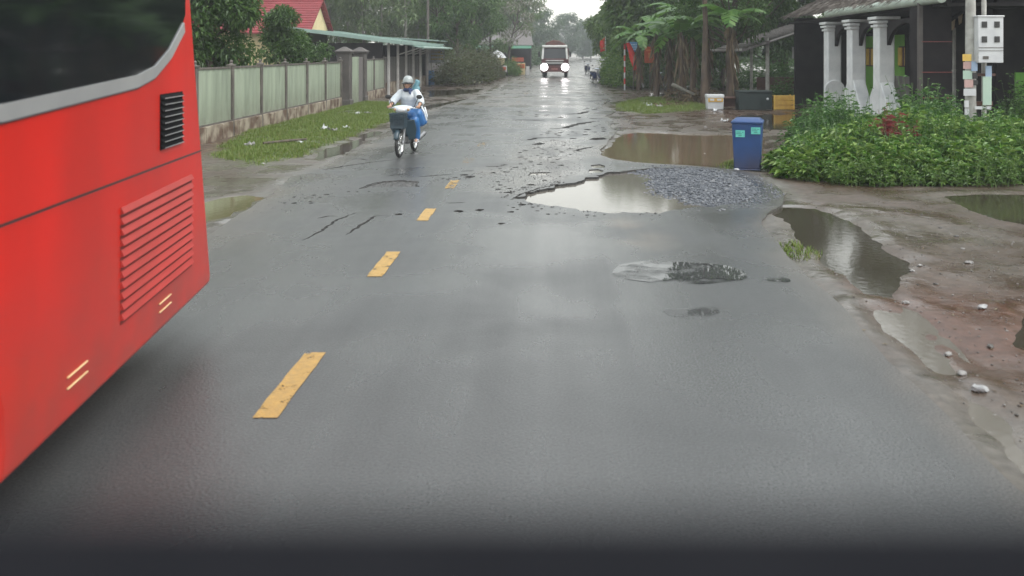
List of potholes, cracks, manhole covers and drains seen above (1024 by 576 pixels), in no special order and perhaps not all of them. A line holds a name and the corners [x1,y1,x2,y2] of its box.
crack [527,101,609,151]
pothole [514,167,756,207]
